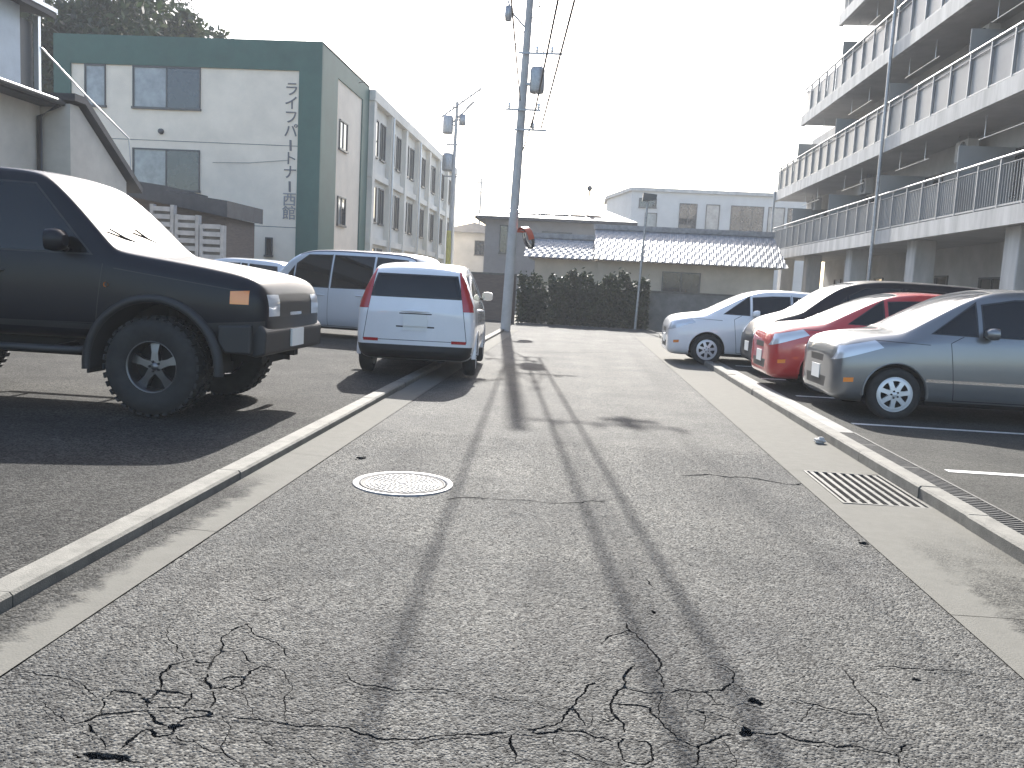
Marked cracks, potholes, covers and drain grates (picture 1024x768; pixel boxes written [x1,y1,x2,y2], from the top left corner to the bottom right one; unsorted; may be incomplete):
pothole [734,723,758,740]
manhole cover [352,471,453,497]
crack [11,621,1013,768]
crack [681,473,803,485]
drain grate [803,470,932,508]
pothole [75,750,138,763]
crack [443,496,611,504]
pothole [742,695,769,708]
